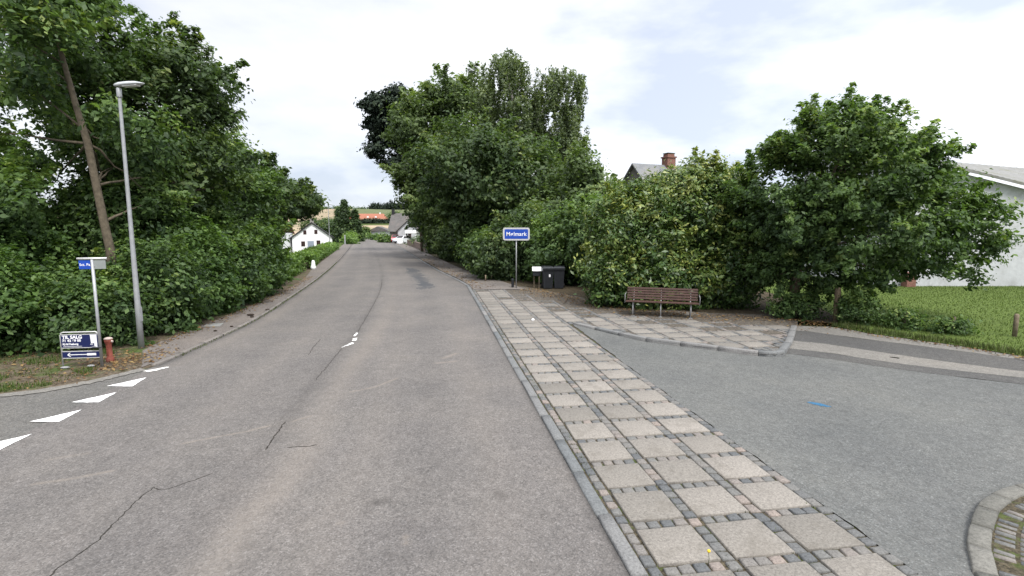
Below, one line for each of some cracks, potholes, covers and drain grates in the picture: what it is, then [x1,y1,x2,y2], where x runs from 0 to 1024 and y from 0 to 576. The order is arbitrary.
crack [50,474,209,576]
